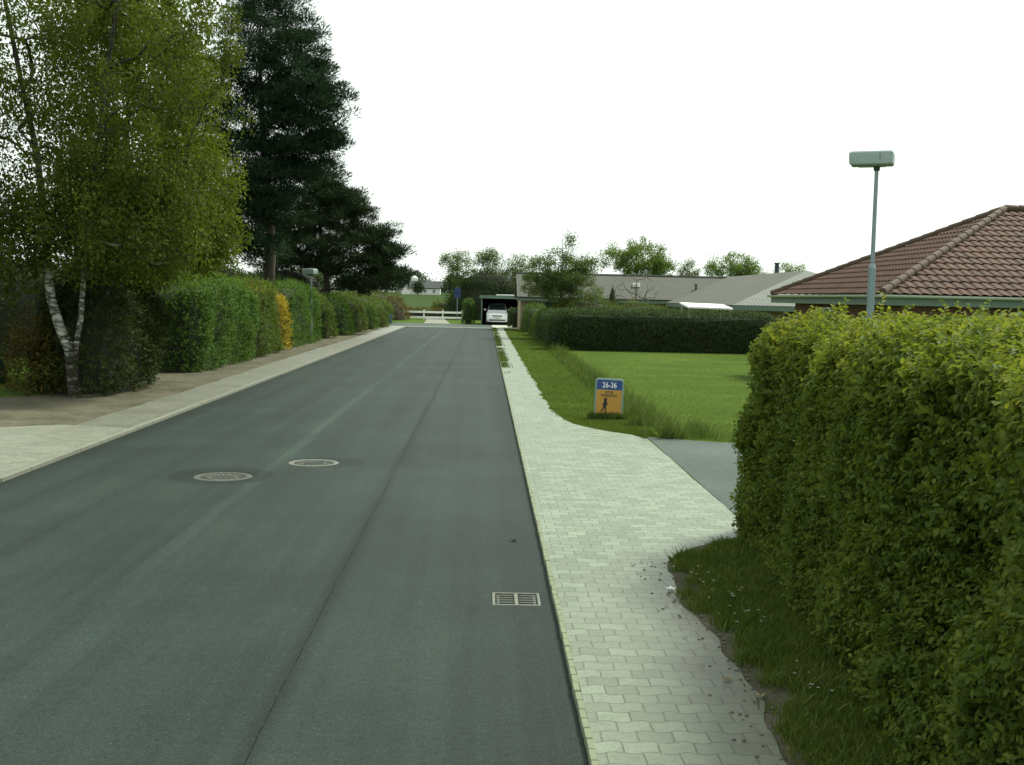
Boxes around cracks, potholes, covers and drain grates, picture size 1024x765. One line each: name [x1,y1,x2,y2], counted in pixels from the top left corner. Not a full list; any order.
drain grate [492,592,541,606]
manhole cover [193,472,253,481]
